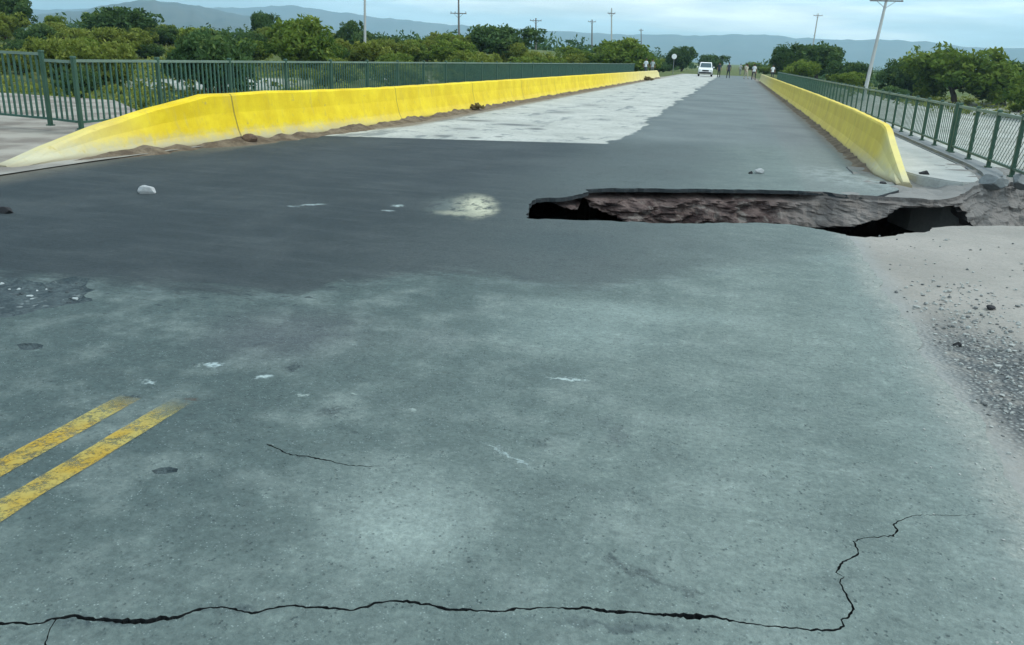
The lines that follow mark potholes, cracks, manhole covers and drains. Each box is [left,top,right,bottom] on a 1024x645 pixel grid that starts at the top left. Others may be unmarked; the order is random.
pothole [527,182,1024,237]
crack [0,514,976,643]
